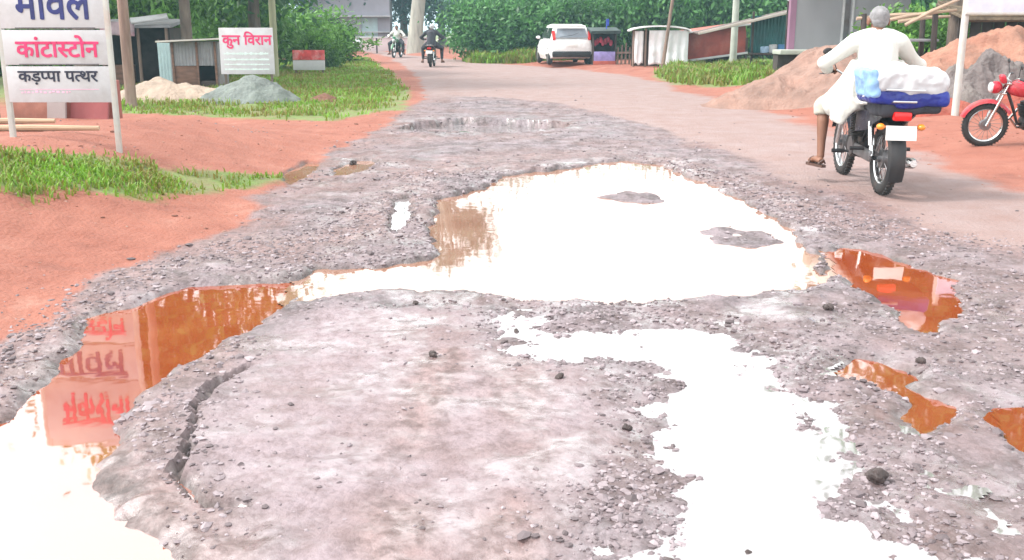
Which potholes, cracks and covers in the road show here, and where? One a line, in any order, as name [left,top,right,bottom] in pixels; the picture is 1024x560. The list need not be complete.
crack [163,361,259,509]
pothole [808,242,986,335]
pothole [395,117,576,134]
pothole [0,270,306,560]
pothole [442,305,1021,560]
pothole [278,156,854,307]
